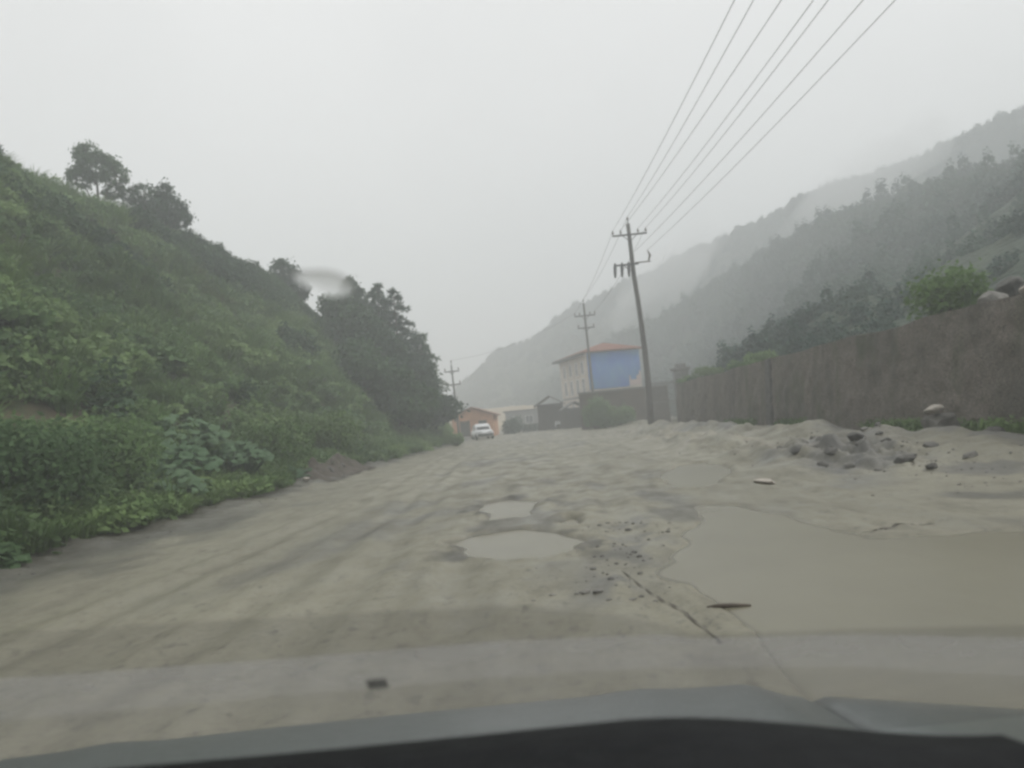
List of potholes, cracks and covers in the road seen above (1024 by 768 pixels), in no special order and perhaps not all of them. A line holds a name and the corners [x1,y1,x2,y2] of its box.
pothole [472,498,543,521]
pothole [652,503,1024,709]
pothole [442,528,595,560]
crack [622,571,719,639]
